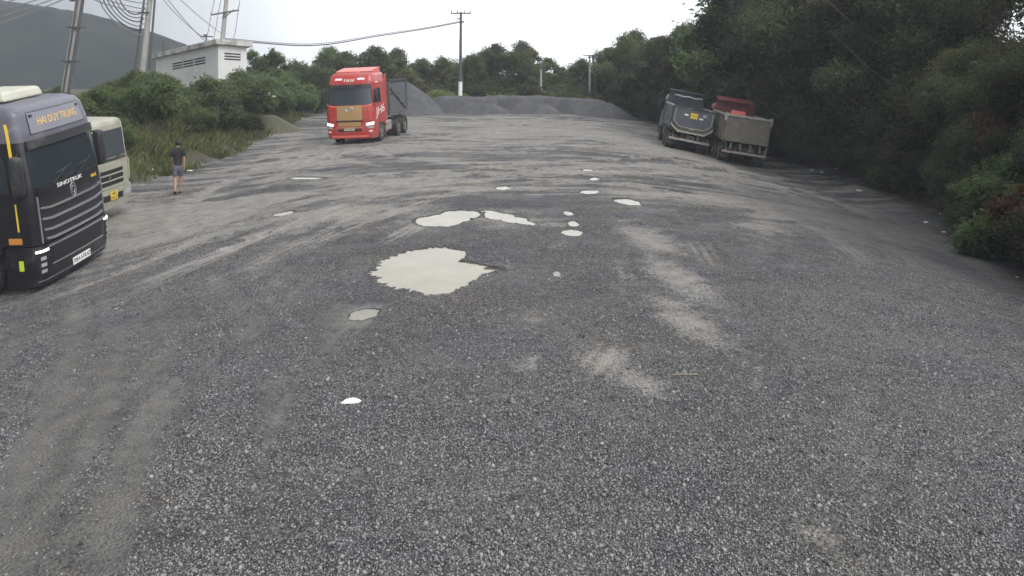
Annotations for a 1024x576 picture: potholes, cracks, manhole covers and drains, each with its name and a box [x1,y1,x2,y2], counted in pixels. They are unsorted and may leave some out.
pothole [410,209,486,227]
pothole [361,244,509,299]
pothole [560,229,585,237]
pothole [479,209,539,226]
pothole [346,308,382,321]
pothole [610,197,643,206]
